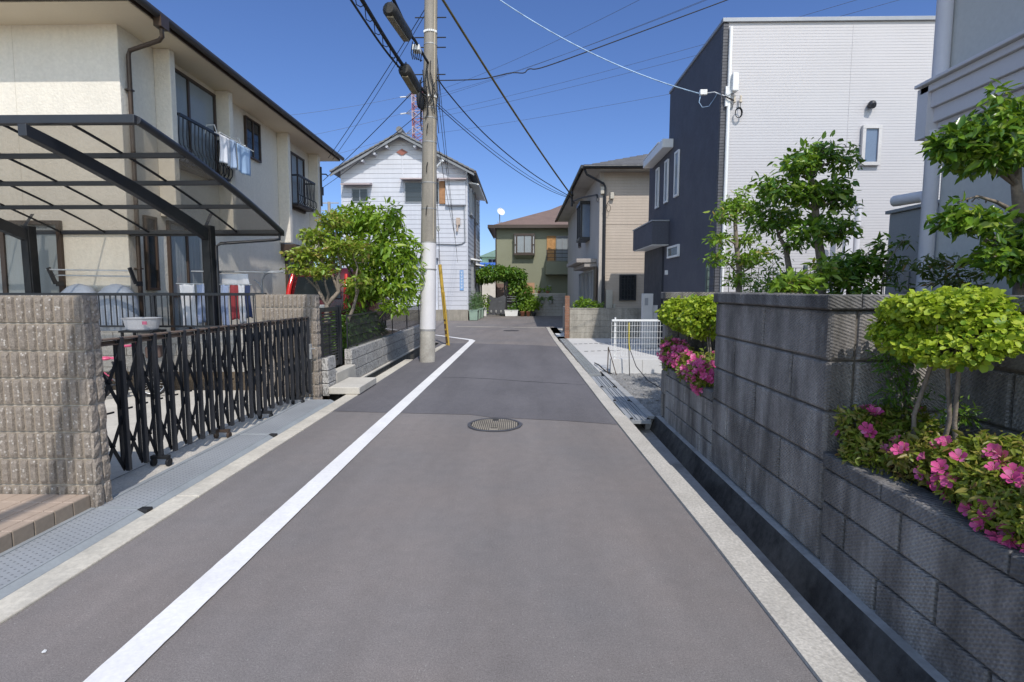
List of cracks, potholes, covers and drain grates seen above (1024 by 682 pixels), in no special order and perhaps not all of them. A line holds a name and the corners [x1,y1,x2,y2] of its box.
manhole cover [468,418,523,432]
